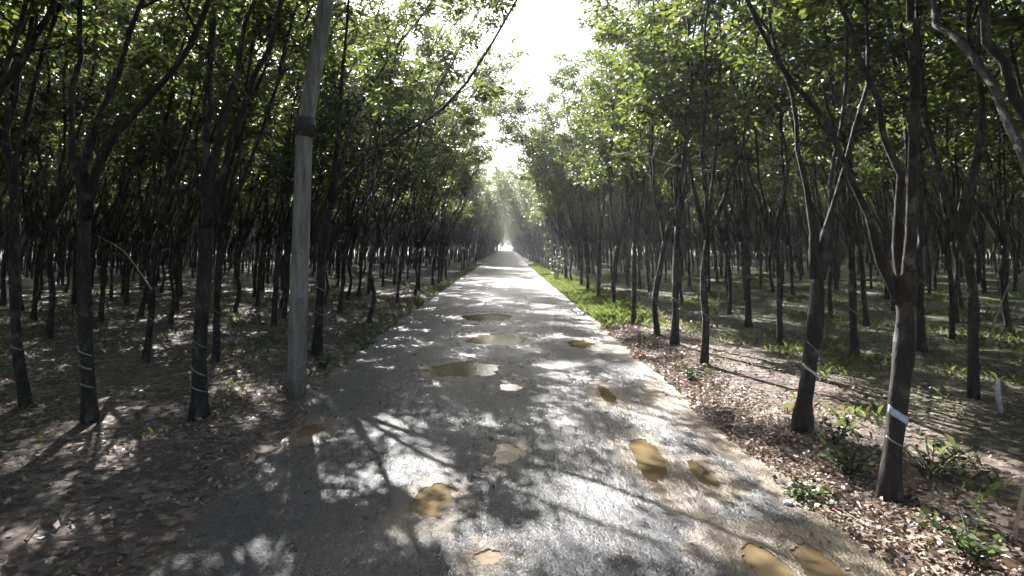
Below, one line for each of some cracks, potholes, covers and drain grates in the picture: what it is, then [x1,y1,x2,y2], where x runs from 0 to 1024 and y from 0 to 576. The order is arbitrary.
pothole [459,314,512,322]
pothole [790,541,844,576]
pothole [628,438,668,483]
pothole [472,548,502,565]
pothole [597,384,618,406]
pothole [742,541,796,576]
pothole [423,361,500,377]
pothole [408,483,454,519]
pothole [492,443,521,464]
pothole [499,382,523,391]
pothole [688,460,720,487]
pothole [293,424,325,438]
